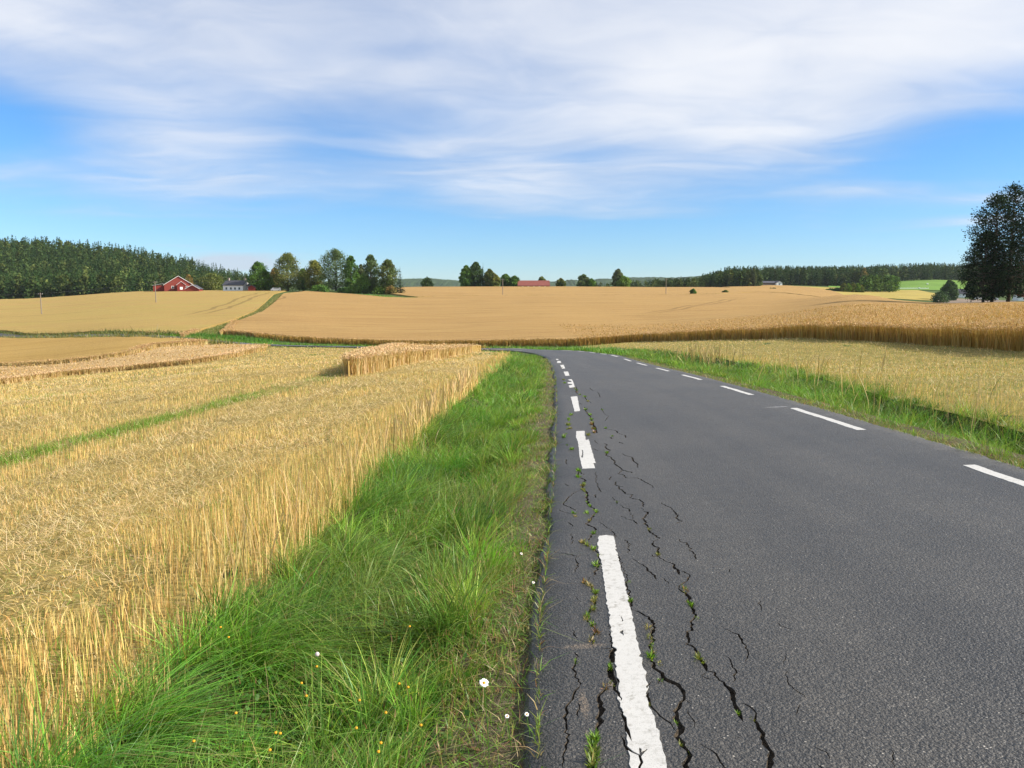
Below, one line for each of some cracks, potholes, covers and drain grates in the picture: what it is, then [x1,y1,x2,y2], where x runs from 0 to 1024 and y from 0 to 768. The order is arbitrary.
crack [555,387,806,768]
